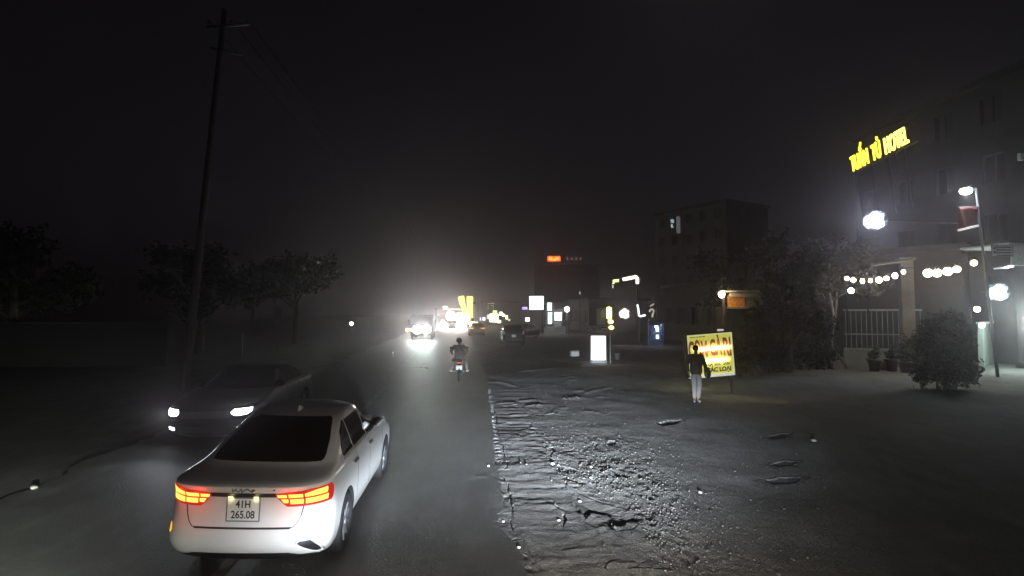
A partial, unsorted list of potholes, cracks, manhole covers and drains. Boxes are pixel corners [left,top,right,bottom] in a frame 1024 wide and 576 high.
pothole [753,475,812,488]
crack [471,367,679,576]
pothole [565,485,651,538]
pothole [760,459,806,470]
pothole [760,432,795,441]
pothole [653,419,685,427]
